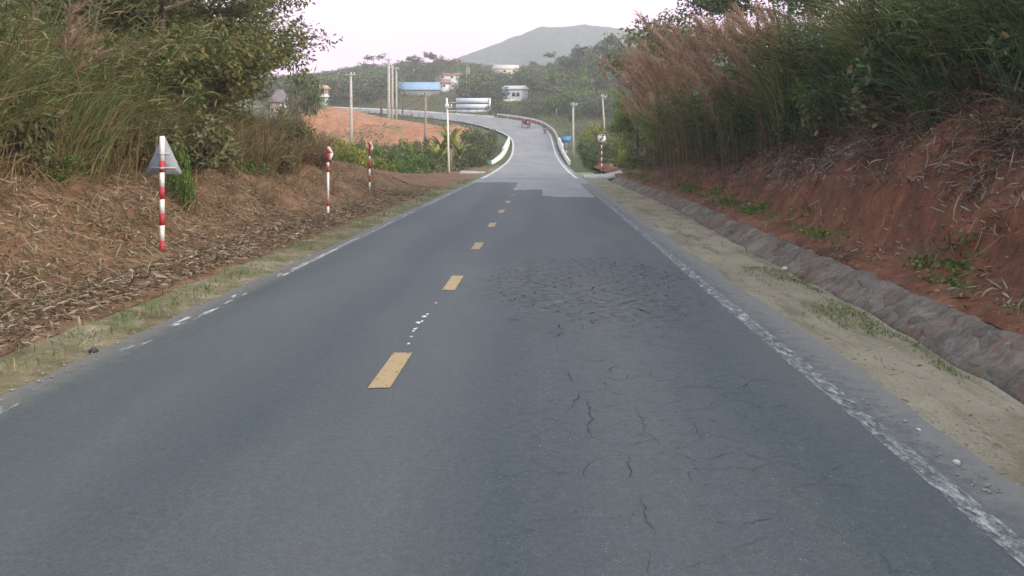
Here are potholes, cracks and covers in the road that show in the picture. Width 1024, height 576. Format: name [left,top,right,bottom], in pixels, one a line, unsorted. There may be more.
crack [475,254,907,573]
